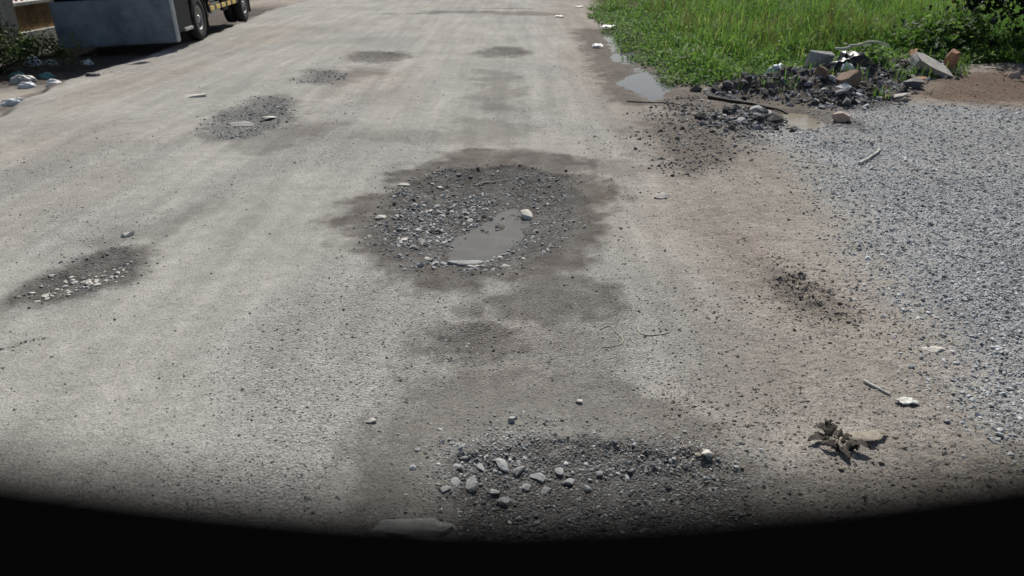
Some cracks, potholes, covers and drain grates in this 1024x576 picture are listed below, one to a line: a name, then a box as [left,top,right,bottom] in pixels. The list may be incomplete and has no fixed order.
pothole [348,52,405,62]
pothole [16,246,137,304]
pothole [295,71,347,83]
pothole [447,436,746,500]
pothole [478,47,527,56]
pothole [382,165,589,271]
pothole [202,95,291,139]
